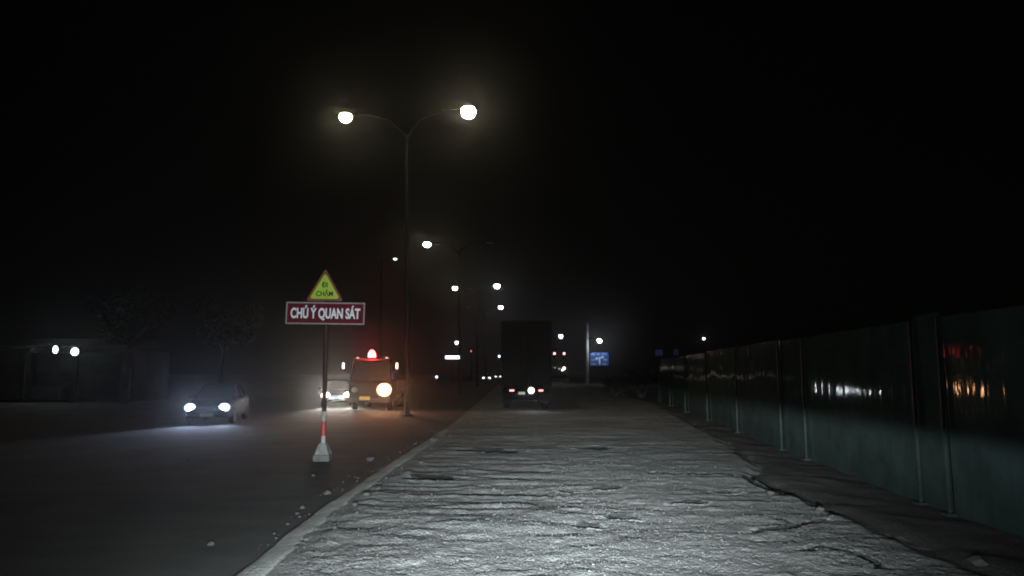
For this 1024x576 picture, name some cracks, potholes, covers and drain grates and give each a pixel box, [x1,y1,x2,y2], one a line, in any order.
pothole [388,471,472,483]
crack [752,514,889,569]
